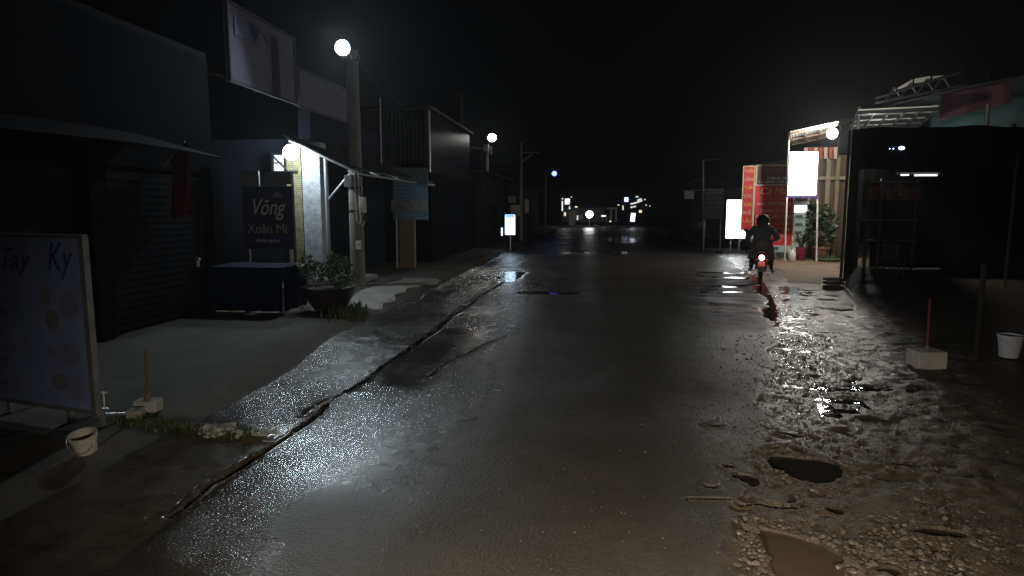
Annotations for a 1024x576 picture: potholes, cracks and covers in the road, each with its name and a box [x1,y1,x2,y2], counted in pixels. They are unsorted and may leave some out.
pothole [724,470,767,490]
pothole [753,524,854,576]
crack [165,282,507,518]
pothole [818,504,854,518]
pothole [698,421,731,429]
pothole [760,452,850,485]
